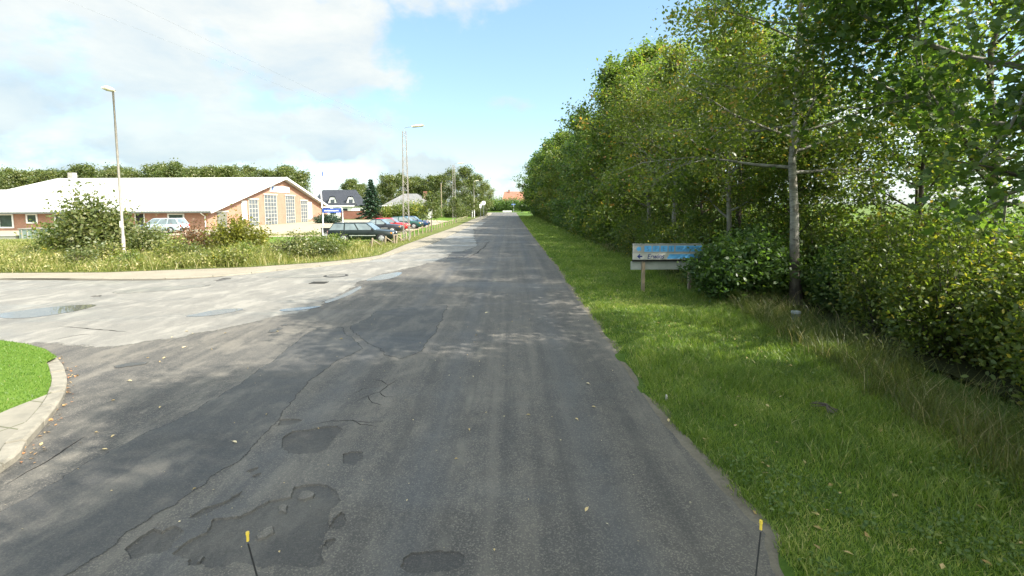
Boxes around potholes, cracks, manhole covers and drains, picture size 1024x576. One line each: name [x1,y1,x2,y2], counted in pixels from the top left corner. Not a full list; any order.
pothole [172,484,341,569]
pothole [400,550,465,574]
pothole [124,525,184,559]
pothole [329,512,347,530]
pothole [282,426,342,454]
pothole [342,451,364,465]
